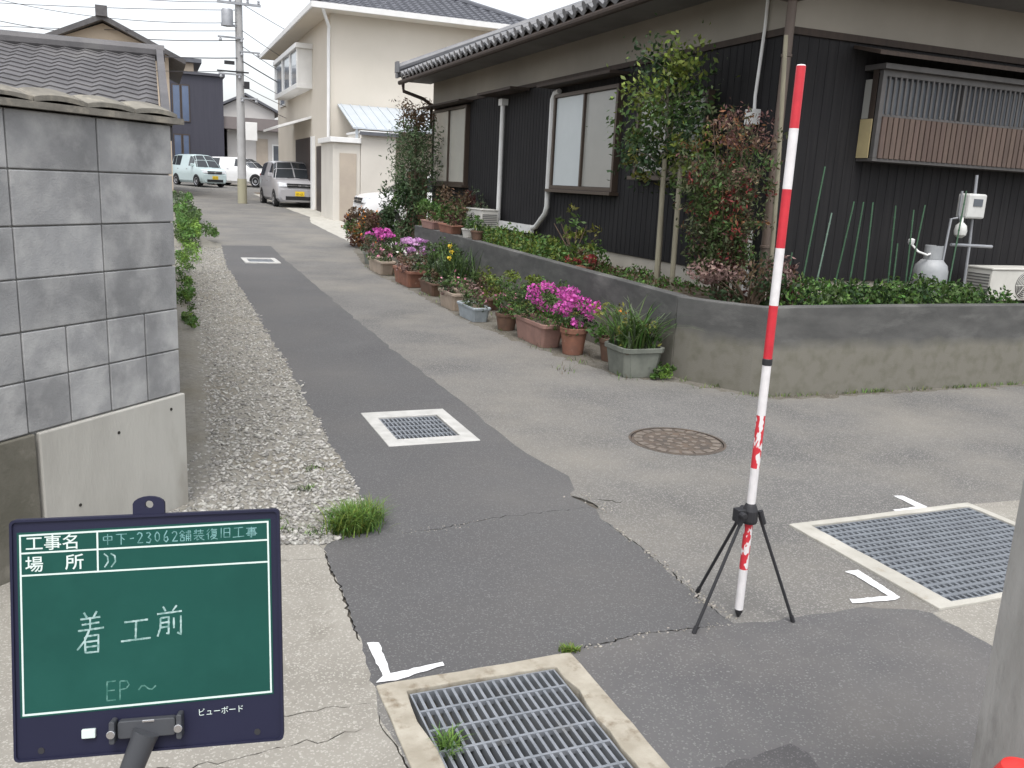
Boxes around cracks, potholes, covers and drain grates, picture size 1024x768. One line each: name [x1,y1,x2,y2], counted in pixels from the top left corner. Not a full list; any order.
crack [379,716,408,768]
manhole cover [628,427,727,456]
drain grate [361,409,480,447]
drain grate [376,652,670,768]
crack [581,528,737,650]
drain grate [789,502,1016,611]
crack [563,493,620,513]
